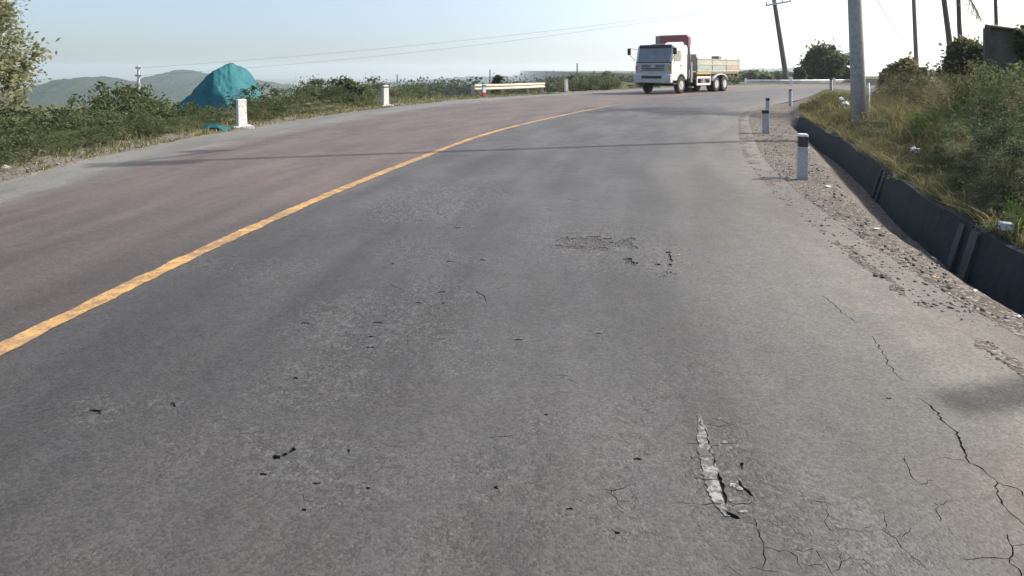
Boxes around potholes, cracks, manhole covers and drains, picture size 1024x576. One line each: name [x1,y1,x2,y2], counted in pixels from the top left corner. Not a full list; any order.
crack [823,296,904,381]
crack [904,398,1024,576]
